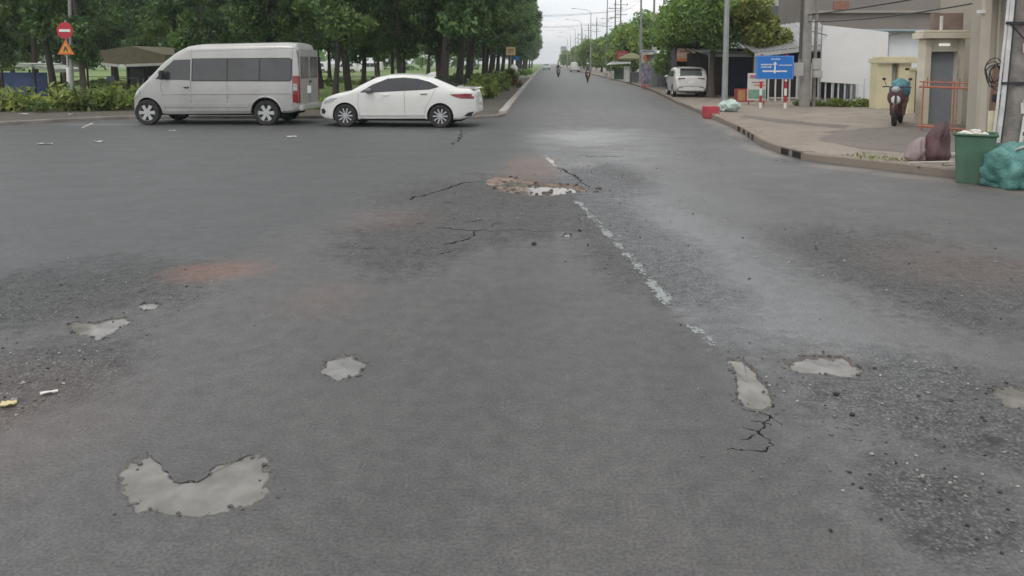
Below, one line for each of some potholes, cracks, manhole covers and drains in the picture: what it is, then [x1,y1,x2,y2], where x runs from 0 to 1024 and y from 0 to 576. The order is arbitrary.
crack [560,155,618,186]
pothole [135,301,163,311]
crack [417,220,549,254]
pothole [777,351,870,379]
pothole [480,175,602,198]
crack [727,409,783,452]
crack [409,182,470,203]
pothole [313,354,373,381]
pothole [66,315,132,340]
pothole [107,450,286,518]
pothole [983,380,1024,409]
pothole [726,357,778,415]
